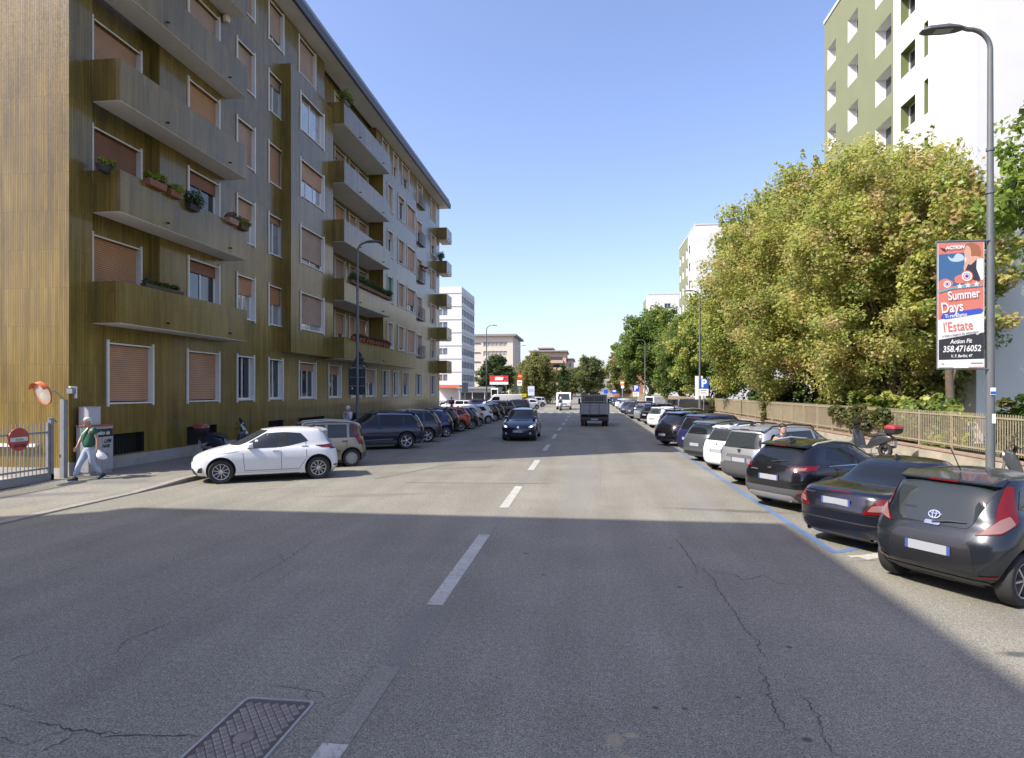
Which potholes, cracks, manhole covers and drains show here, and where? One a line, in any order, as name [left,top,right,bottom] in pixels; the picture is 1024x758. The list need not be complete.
crack [676,540,841,756]
manhole cover [179,697,314,758]
crack [0,703,193,752]
